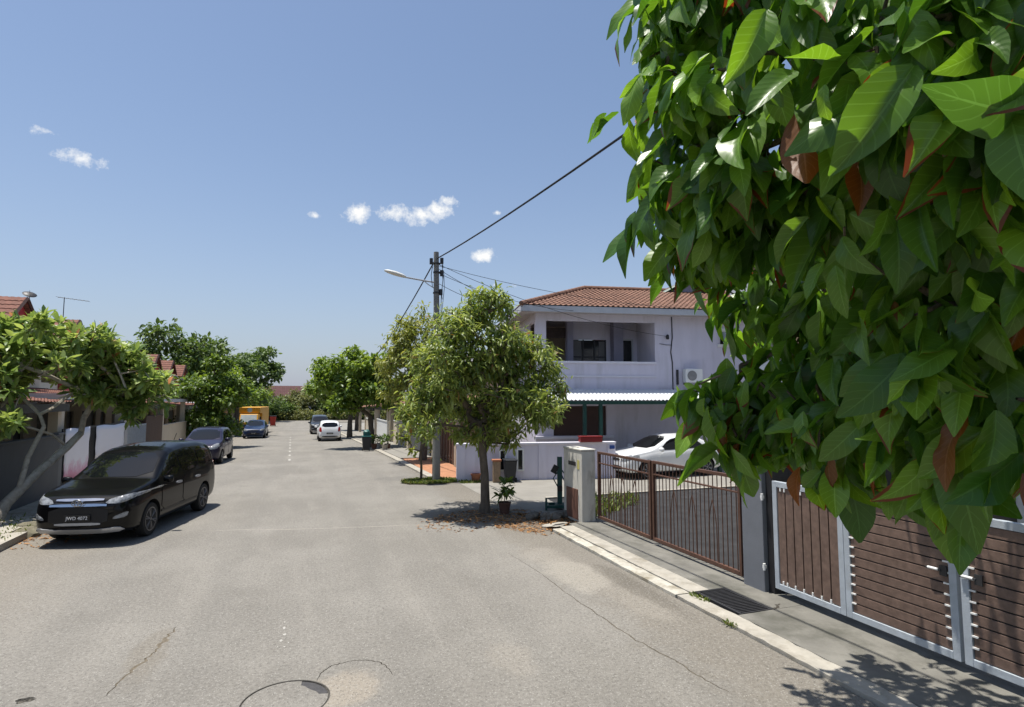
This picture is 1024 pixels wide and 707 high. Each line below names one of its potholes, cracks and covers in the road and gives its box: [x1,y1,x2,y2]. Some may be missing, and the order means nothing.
crack [107,627,176,695]
crack [513,556,727,691]
manhole cover [239,680,330,707]
drain grate [695,587,773,615]
